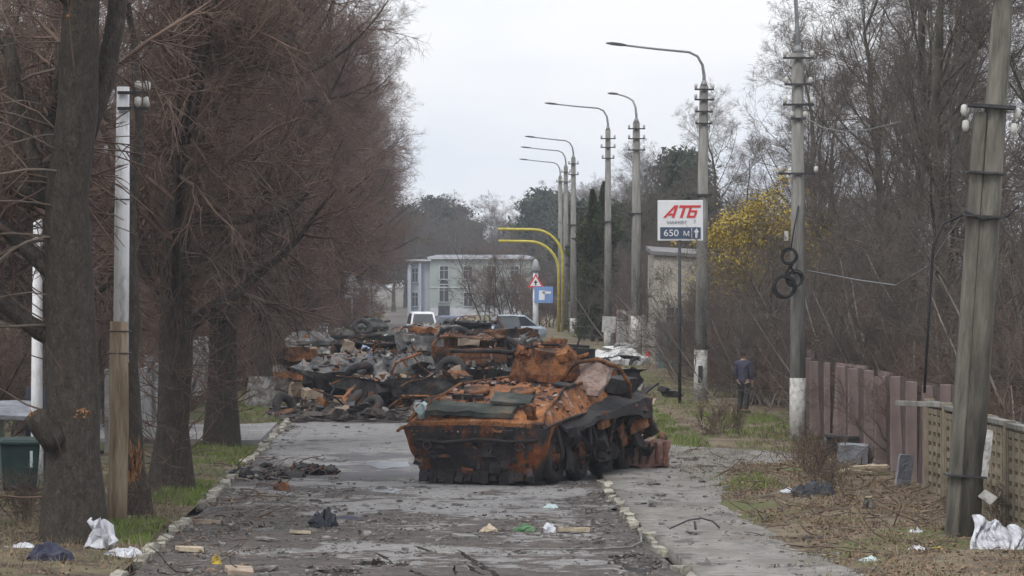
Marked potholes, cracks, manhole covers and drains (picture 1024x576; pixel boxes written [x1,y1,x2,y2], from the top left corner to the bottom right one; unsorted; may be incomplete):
crack [453,550,500,576]
